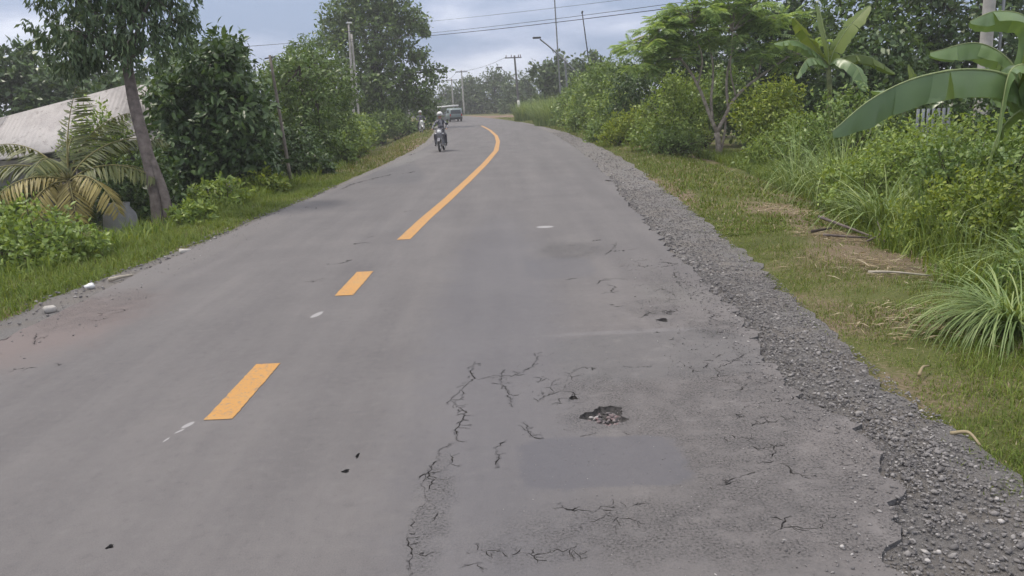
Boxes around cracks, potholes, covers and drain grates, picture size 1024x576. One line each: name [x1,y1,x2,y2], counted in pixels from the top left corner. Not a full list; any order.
crack [772,516,836,533]
crack [684,352,856,489]
pothole [579,406,629,426]
crack [406,359,595,573]
